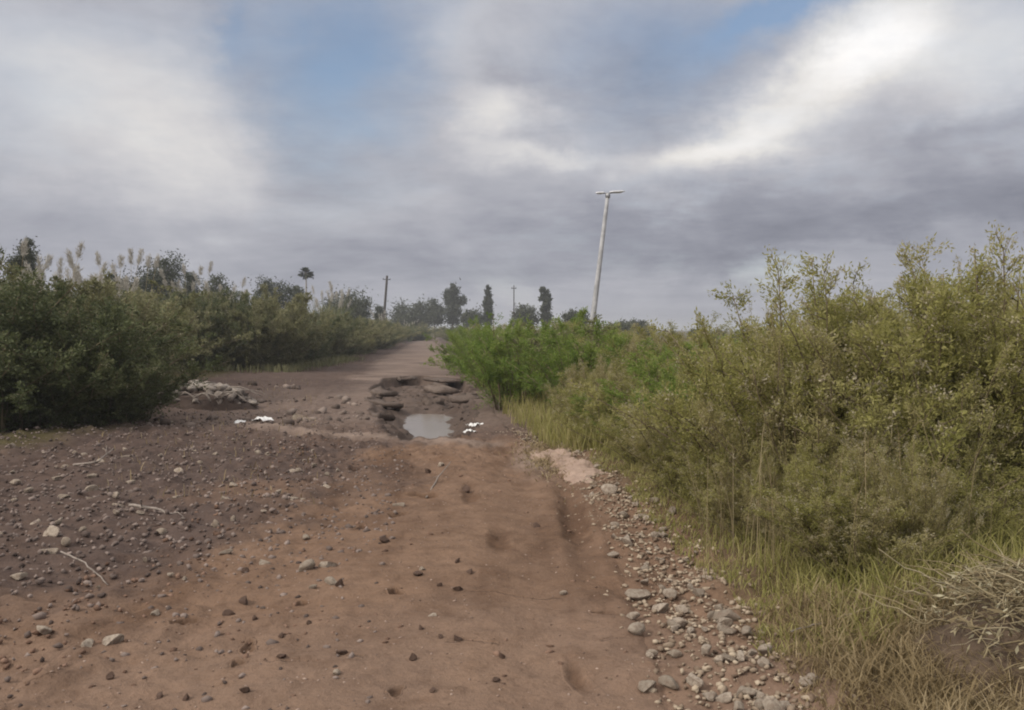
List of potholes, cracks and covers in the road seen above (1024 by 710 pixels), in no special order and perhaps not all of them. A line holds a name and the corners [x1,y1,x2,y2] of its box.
pothole [364,375,480,441]
